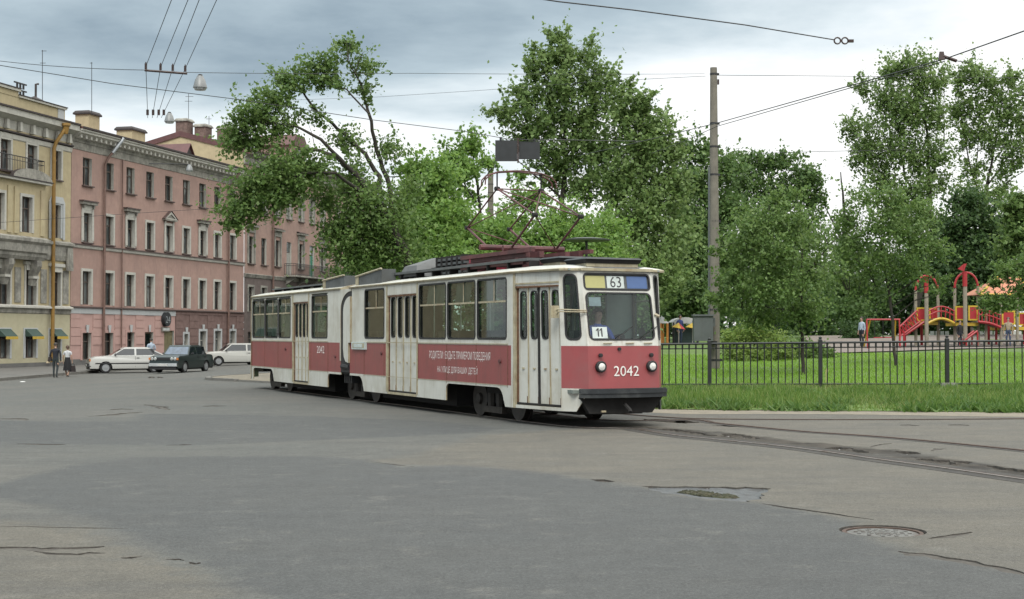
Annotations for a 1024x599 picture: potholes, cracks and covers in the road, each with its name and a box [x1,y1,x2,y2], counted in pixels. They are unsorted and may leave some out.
crack [0,546,105,555]
pothole [643,486,770,502]
manhole cover [839,525,927,537]
crack [897,532,1024,575]
crack [100,405,170,416]
crack [766,504,874,520]
